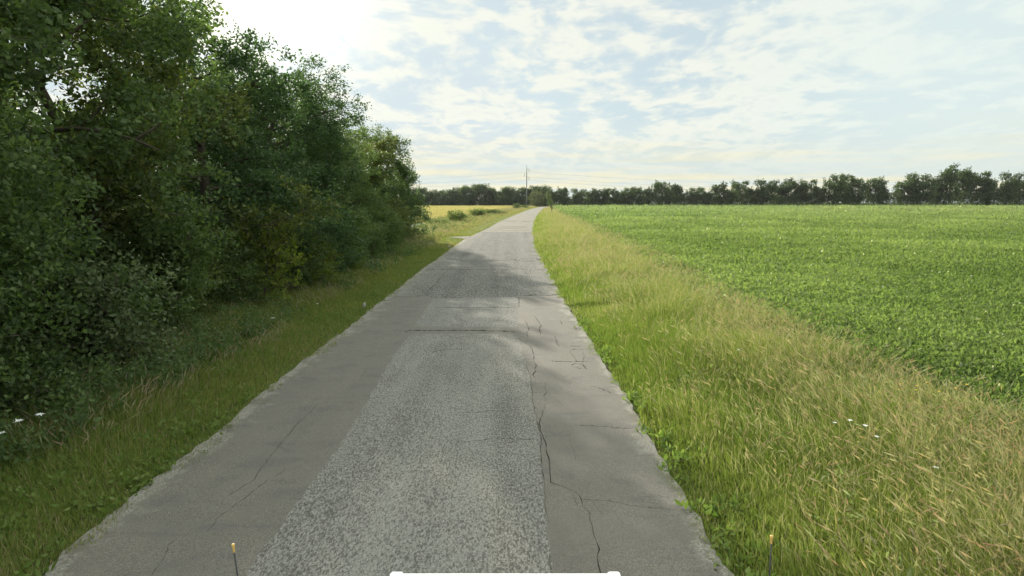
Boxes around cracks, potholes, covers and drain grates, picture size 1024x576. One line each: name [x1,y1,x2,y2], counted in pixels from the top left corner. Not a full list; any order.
crack [207,407,315,532]
crack [436,295,671,574]
